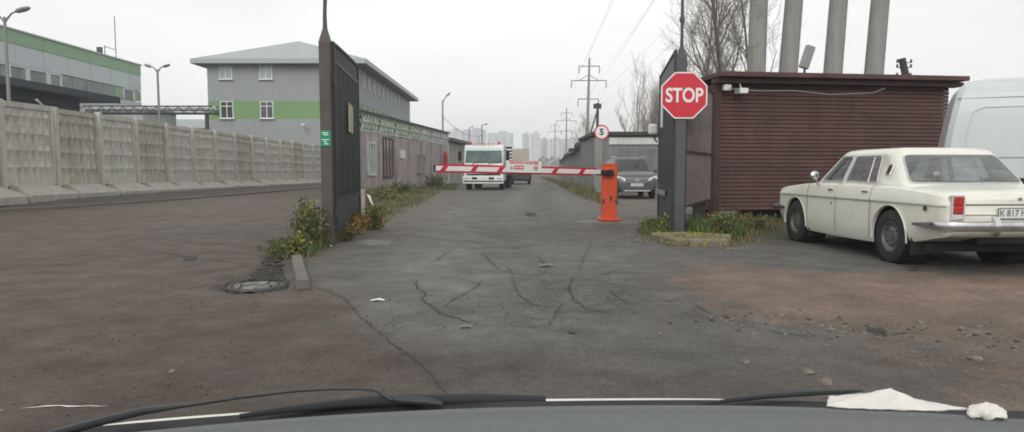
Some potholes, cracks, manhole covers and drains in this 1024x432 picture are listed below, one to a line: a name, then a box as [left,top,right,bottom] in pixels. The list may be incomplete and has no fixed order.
manhole cover [225,281,284,293]
crack [402,242,633,329]
